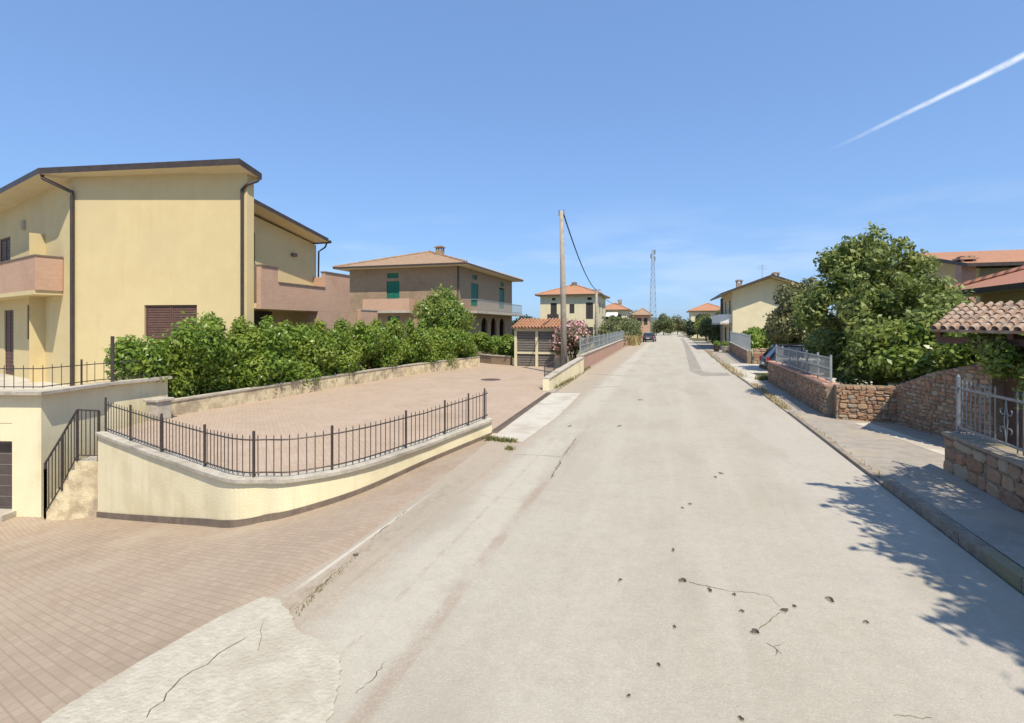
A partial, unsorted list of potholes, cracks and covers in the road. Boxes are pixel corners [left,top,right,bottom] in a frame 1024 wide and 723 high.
crack [146,615,269,718]
crack [690,582,782,654]
